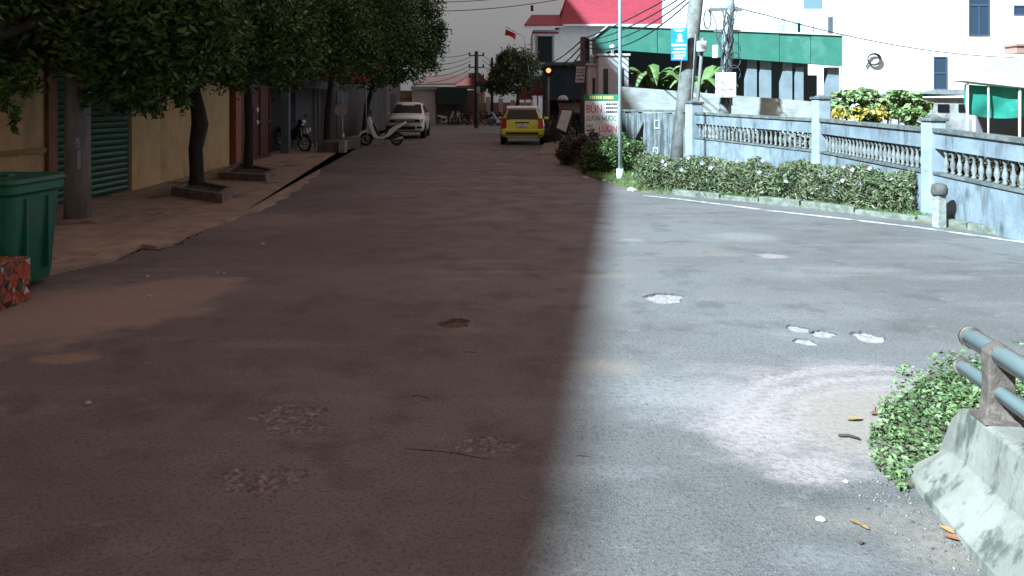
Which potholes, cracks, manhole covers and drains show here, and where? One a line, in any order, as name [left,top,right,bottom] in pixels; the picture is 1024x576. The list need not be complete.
pothole [437,318,470,328]
pothole [642,293,685,304]
crack [406,436,525,459]
pothole [792,338,819,346]
pothole [786,325,813,333]
pothole [808,330,837,338]
pothole [849,331,886,343]
